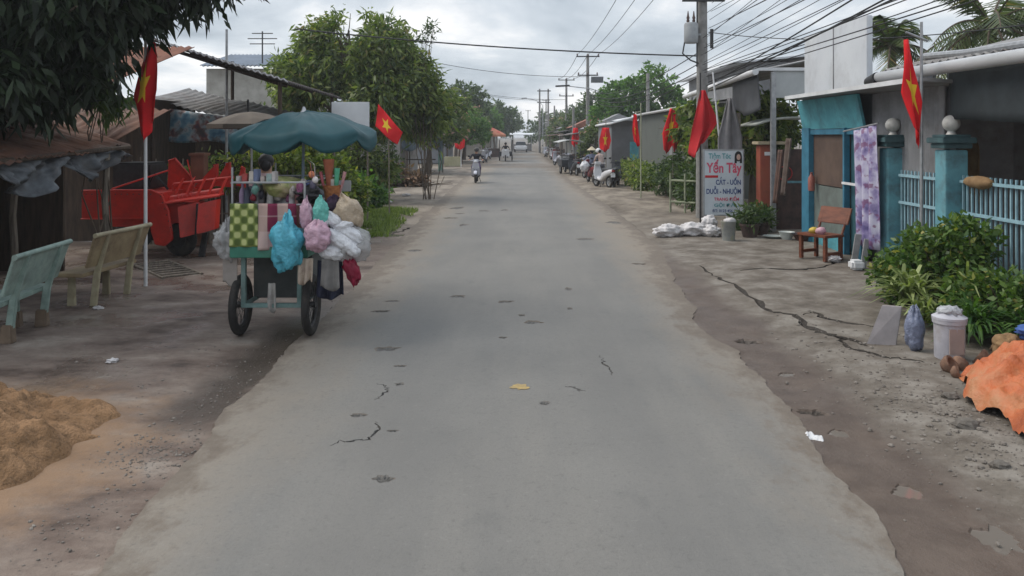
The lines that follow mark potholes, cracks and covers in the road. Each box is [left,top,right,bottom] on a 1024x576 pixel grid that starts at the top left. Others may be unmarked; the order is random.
crack [565,356,613,391]
pothole [890,483,924,500]
crack [330,422,381,446]
crack [701,262,923,362]
pothole [371,475,396,483]
pothole [968,523,1024,556]
